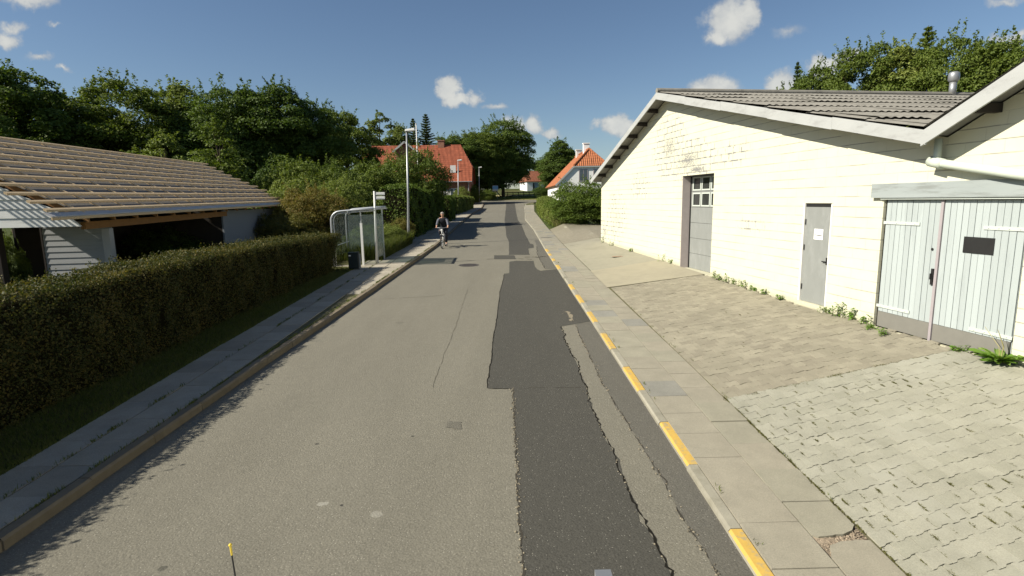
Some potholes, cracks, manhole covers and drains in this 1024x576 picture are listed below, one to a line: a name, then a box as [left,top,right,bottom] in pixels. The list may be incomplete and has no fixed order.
pothole [812,526,868,558]
crack [562,326,675,576]
